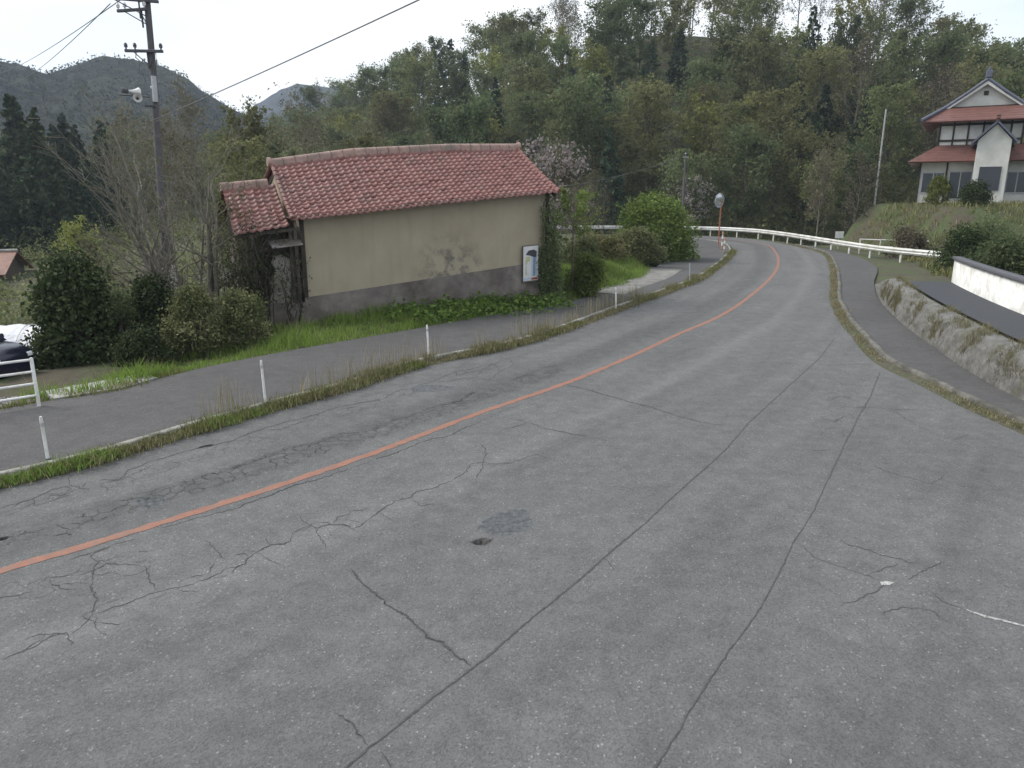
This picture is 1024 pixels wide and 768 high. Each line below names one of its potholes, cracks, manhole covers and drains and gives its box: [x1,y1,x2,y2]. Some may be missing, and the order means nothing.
crack [2,339,963,768]
pothole [469,538,493,546]
